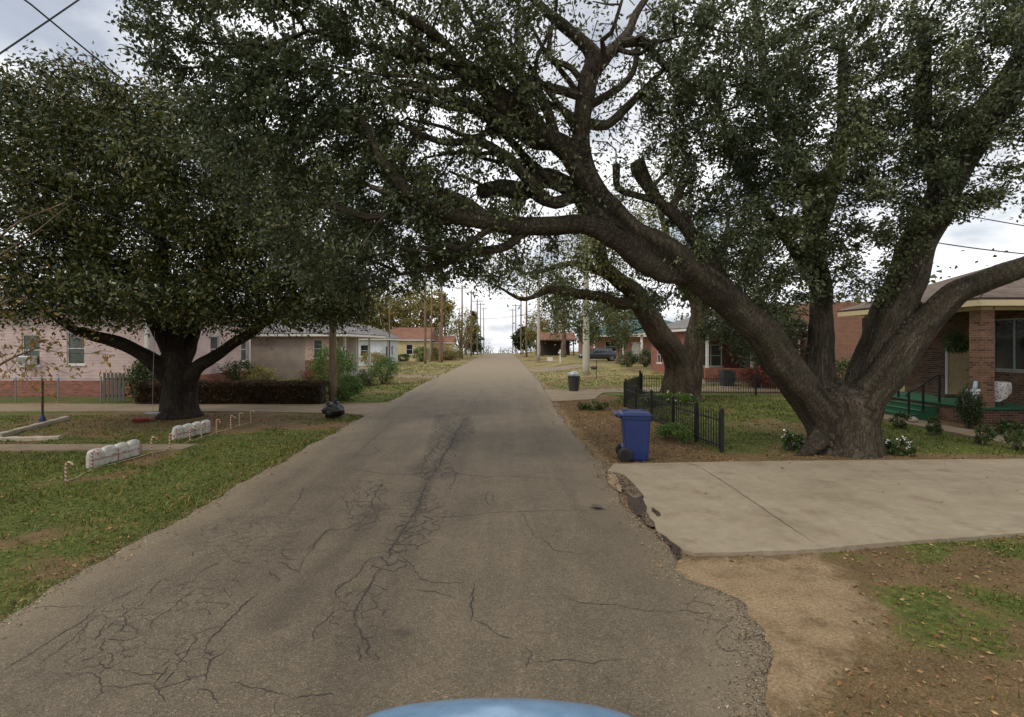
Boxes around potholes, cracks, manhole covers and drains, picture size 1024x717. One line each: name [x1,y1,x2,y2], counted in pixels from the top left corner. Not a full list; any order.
crack [560,593,765,658]
pothole [607,474,622,492]
pothole [642,512,655,527]
pothole [627,495,647,517]
crack [0,390,629,701]
pothole [614,473,642,498]
